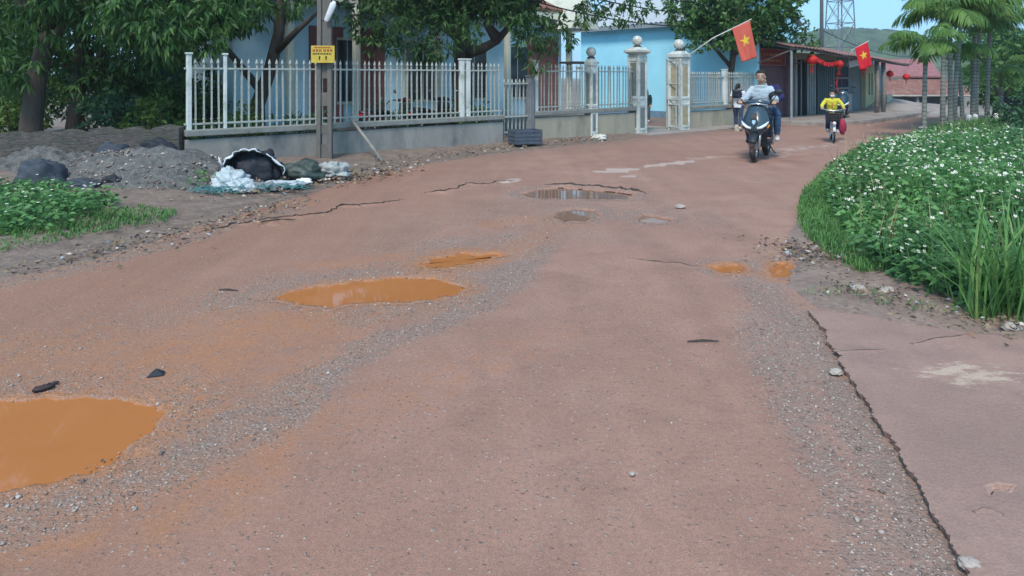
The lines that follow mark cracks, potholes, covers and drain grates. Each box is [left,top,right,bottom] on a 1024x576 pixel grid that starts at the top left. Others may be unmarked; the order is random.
pothole [631,212,681,224]
pothole [414,250,508,270]
pothole [0,391,179,498]
crack [833,345,885,355]
pothole [705,262,752,276]
crack [200,199,404,233]
pothole [762,260,797,279]
pothole [266,275,474,312]
crack [627,258,707,268]
pothole [514,187,638,201]
crack [910,332,967,345]
crack [422,180,519,194]
